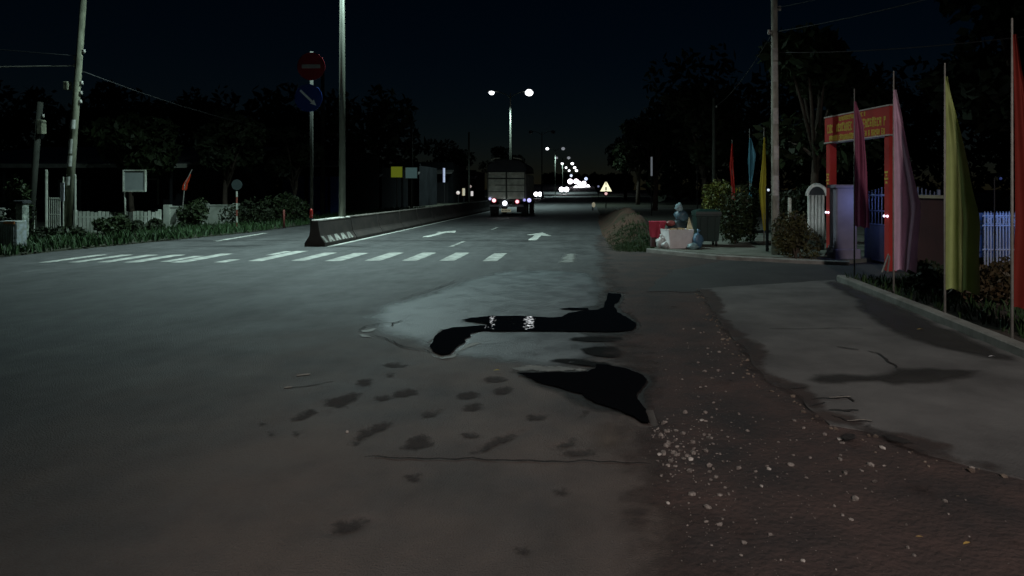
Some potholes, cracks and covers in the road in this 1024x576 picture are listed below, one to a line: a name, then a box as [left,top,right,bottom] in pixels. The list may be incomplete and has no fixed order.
pothole [404,435,433,448]
crack [792,387,873,422]
pothole [355,423,389,444]
crack [364,455,652,464]
pothole [326,393,358,407]
